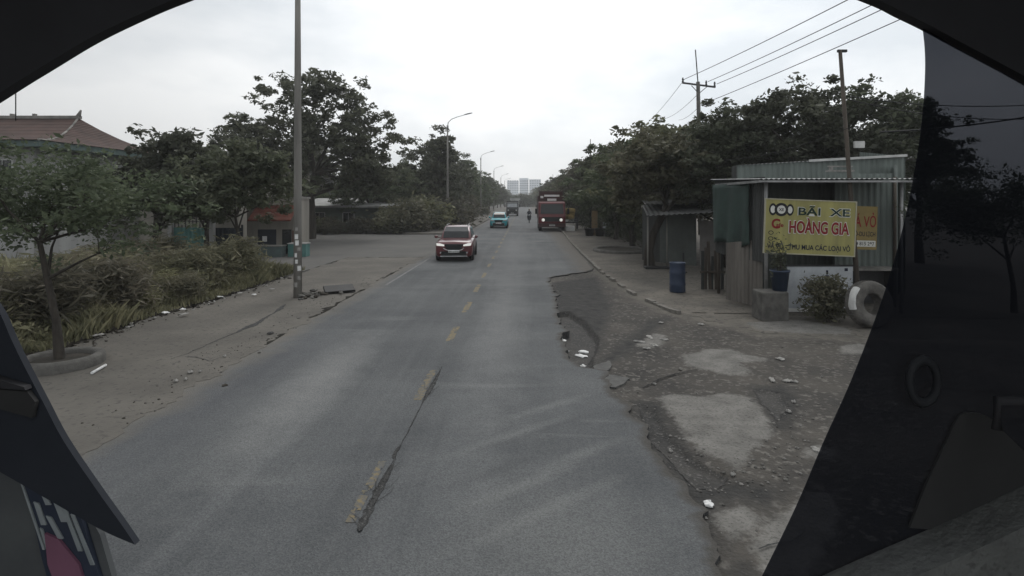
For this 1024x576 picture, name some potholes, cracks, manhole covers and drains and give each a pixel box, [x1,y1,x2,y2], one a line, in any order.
crack [349,367,443,531]
crack [172,304,286,361]
pothole [559,311,599,368]
